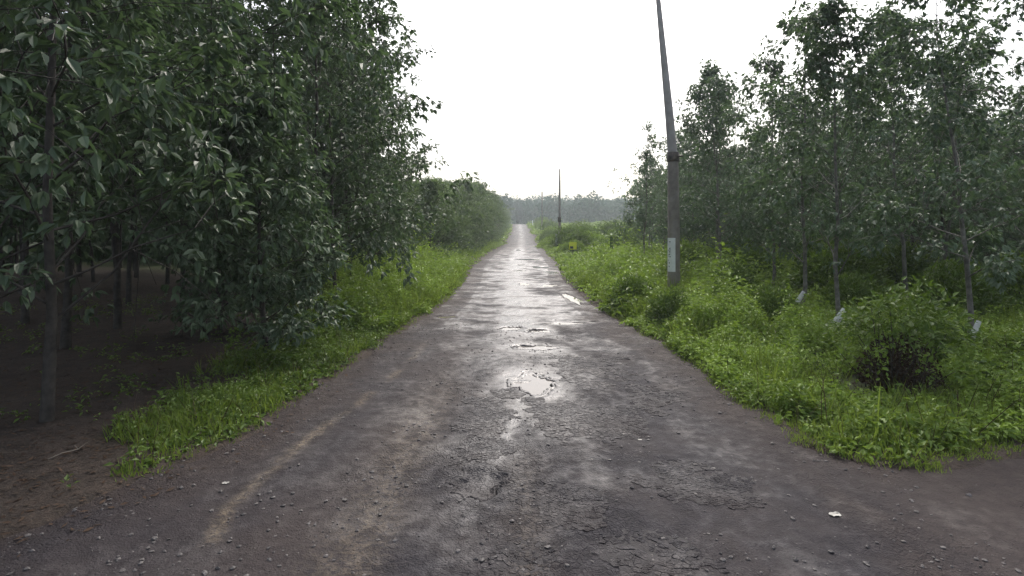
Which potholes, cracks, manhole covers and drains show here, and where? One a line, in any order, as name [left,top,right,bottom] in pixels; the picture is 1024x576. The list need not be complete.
crack [481,475,731,576]
pothole [506,371,561,397]
pothole [560,292,590,307]
pothole [444,463,515,502]
